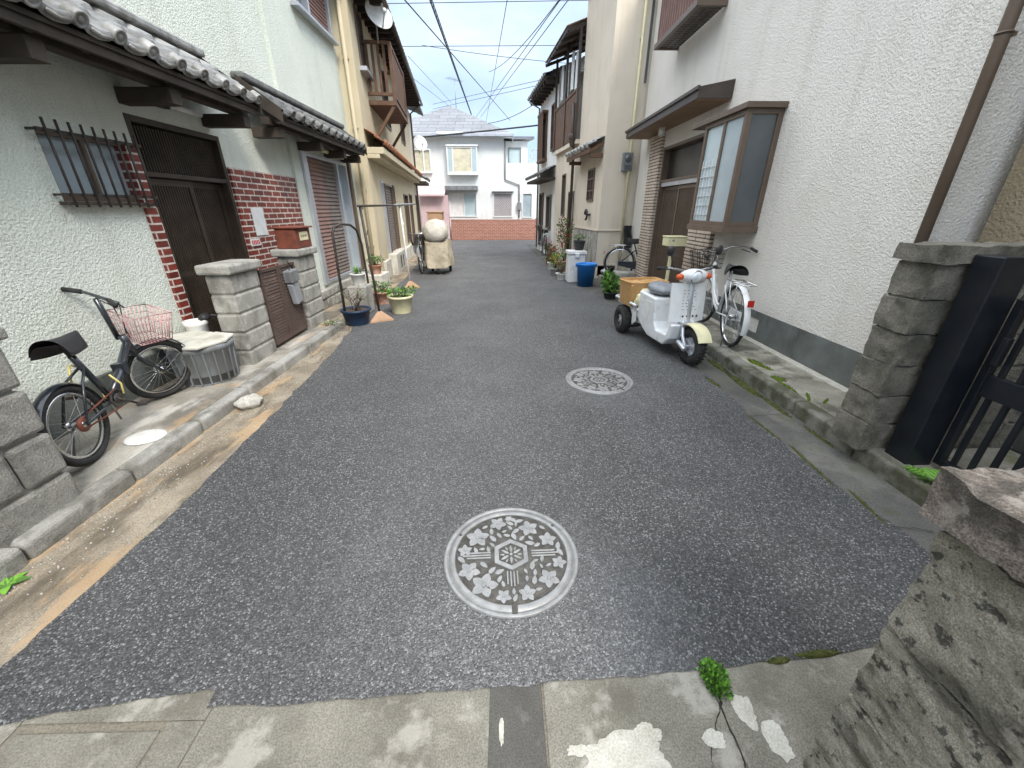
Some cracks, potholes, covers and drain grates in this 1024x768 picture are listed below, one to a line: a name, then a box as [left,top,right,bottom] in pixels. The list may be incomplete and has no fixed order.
manhole cover [566,367,633,395]
manhole cover [443,508,579,619]
crack [711,693,746,768]
utility cover [121,428,169,446]
